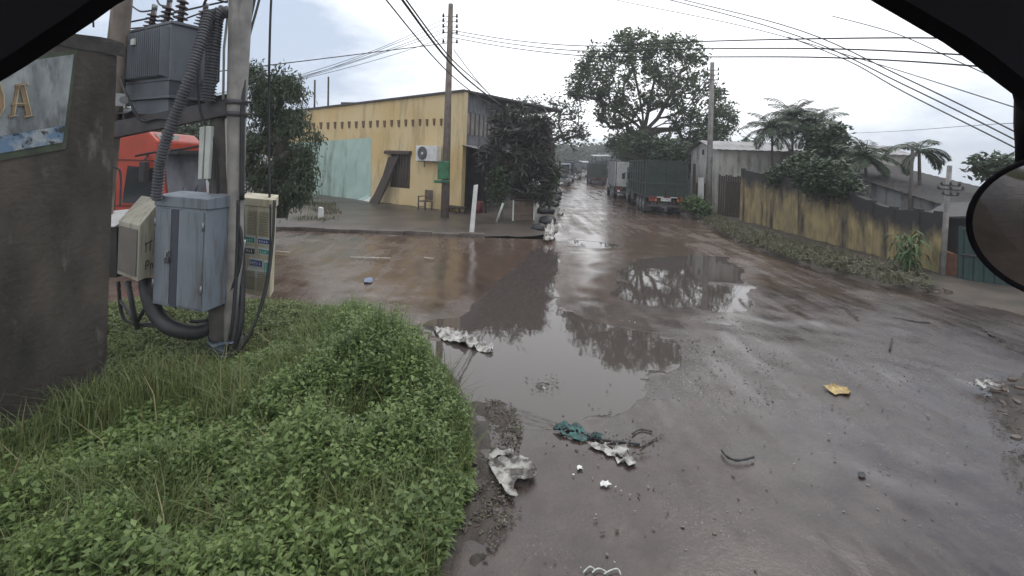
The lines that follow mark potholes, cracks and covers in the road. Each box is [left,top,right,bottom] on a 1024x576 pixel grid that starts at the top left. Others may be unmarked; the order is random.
crack [892,317,937,327]
pothole [421,247,683,430]
